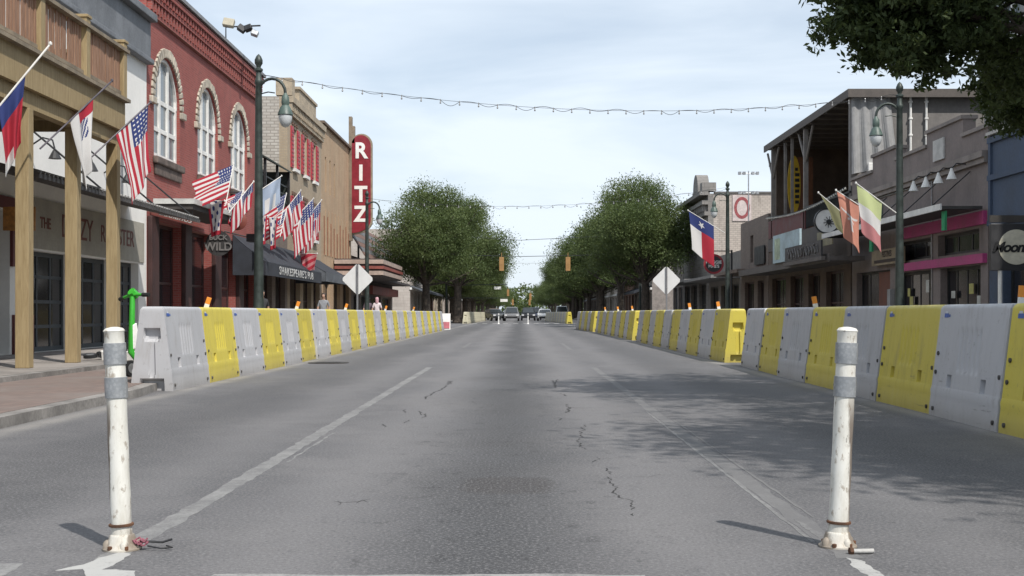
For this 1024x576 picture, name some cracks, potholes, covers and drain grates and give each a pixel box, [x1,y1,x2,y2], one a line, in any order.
crack [552,379,635,516]
